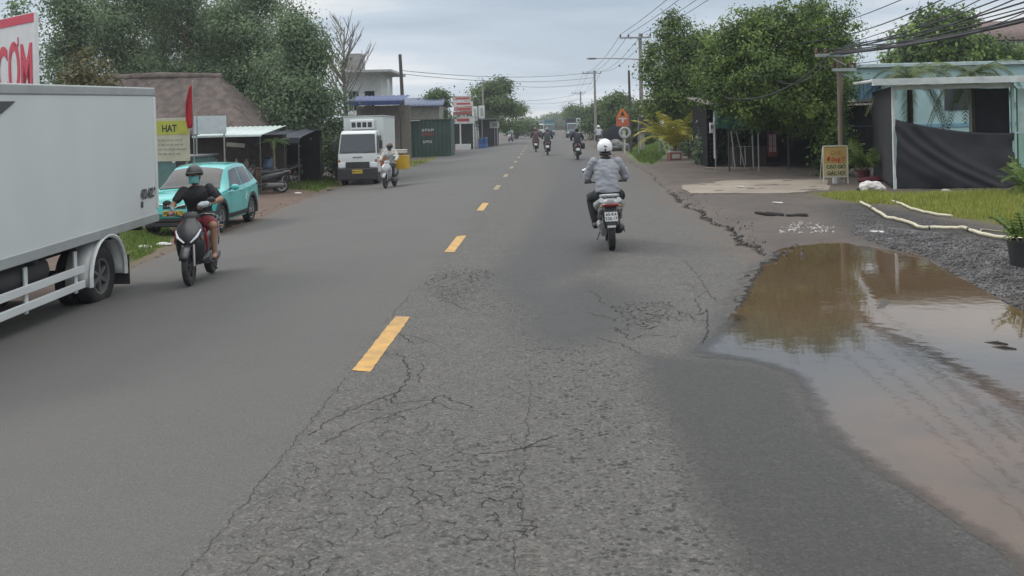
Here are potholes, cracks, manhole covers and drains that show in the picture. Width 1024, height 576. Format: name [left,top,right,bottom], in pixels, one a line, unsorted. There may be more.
crack [424,269,494,317]
crack [226,353,537,576]
crack [591,261,716,354]
pothole [720,243,891,322]
